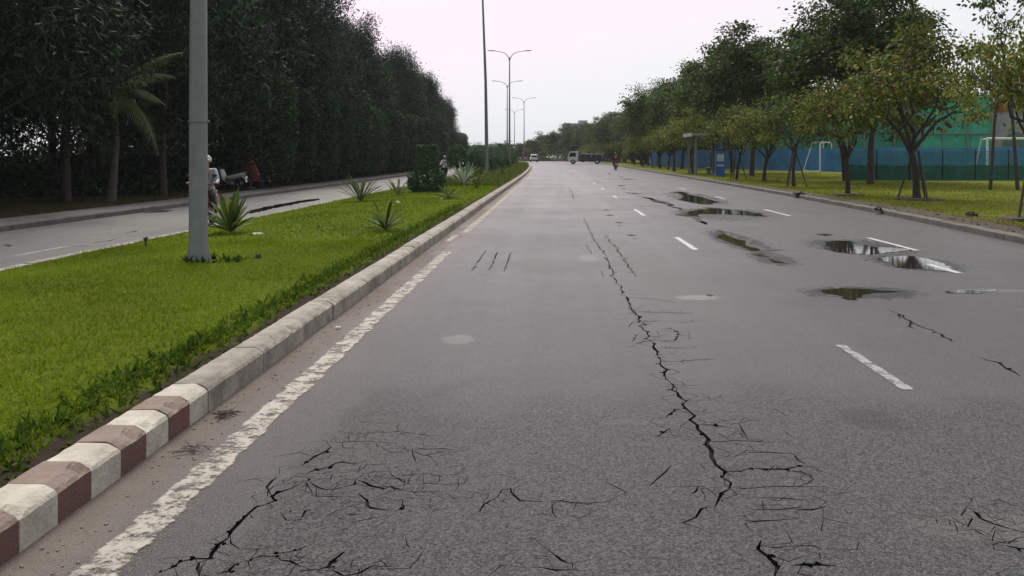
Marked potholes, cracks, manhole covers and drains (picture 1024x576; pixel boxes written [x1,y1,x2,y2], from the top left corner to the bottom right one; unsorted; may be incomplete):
crack [982,358,1021,377]
crack [916,492,1024,576]
crack [887,309,956,342]
crack [156,422,627,576]
pothole [714,230,779,251]
crack [584,217,860,576]
pothole [677,207,771,222]
pothole [670,192,723,205]
